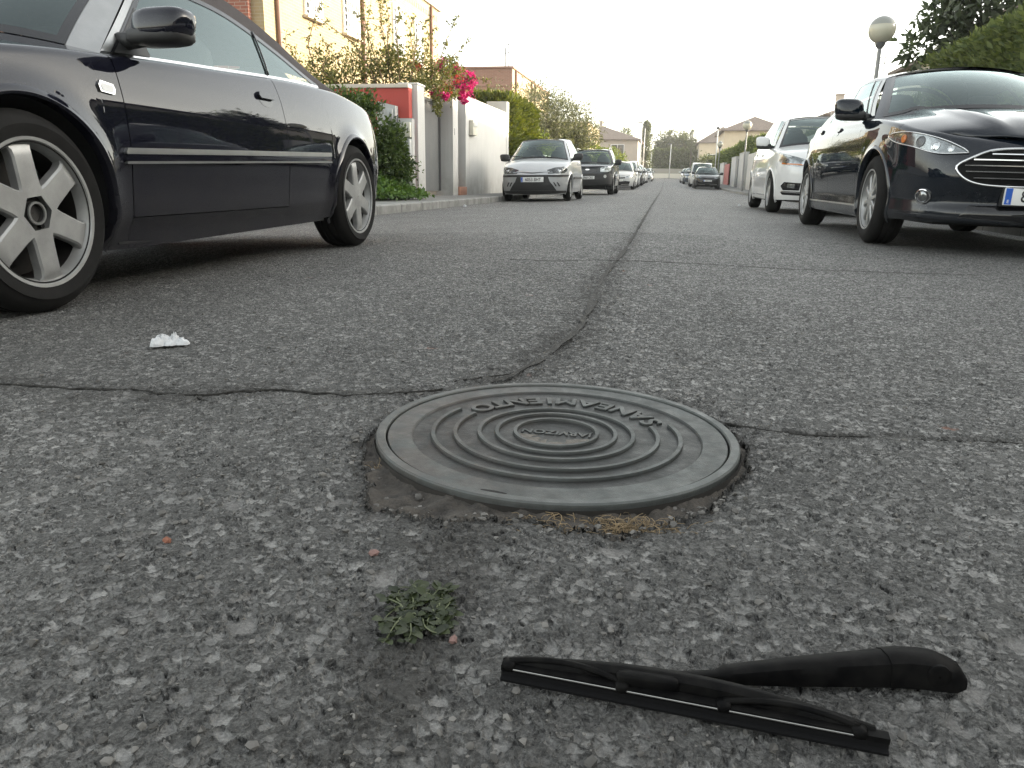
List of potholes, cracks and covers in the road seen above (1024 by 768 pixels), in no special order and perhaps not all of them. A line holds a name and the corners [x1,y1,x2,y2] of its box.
crack [725,423,1019,445]
manhole cover [374,383,742,517]
crack [0,383,443,401]
